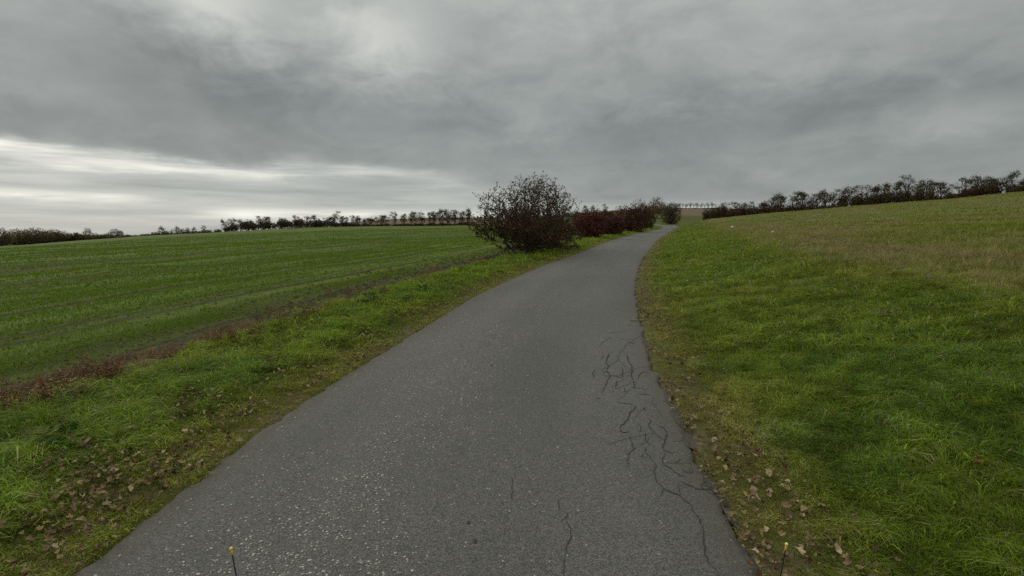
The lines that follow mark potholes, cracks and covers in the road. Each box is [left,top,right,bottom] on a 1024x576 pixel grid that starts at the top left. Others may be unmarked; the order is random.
crack [592,331,719,574]
